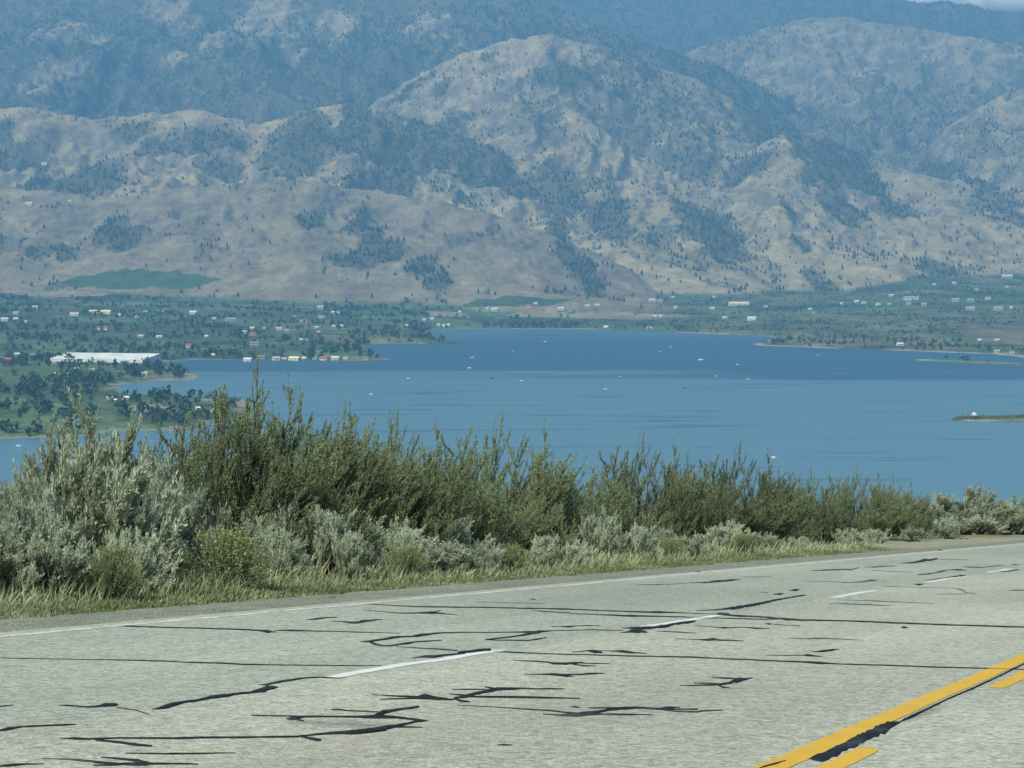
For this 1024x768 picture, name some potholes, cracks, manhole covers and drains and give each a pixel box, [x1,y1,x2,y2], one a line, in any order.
crack [0,571,1024,767]
